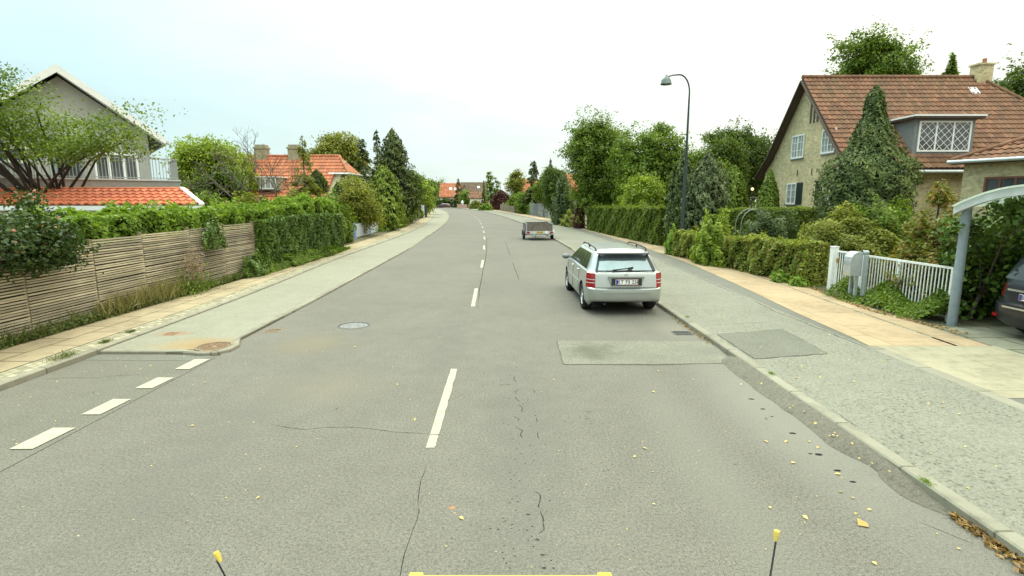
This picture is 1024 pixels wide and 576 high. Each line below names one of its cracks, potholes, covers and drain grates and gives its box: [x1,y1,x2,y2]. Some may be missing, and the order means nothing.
manhole cover [194,341,234,351]
crack [400,468,426,575]
crack [277,425,426,434]
